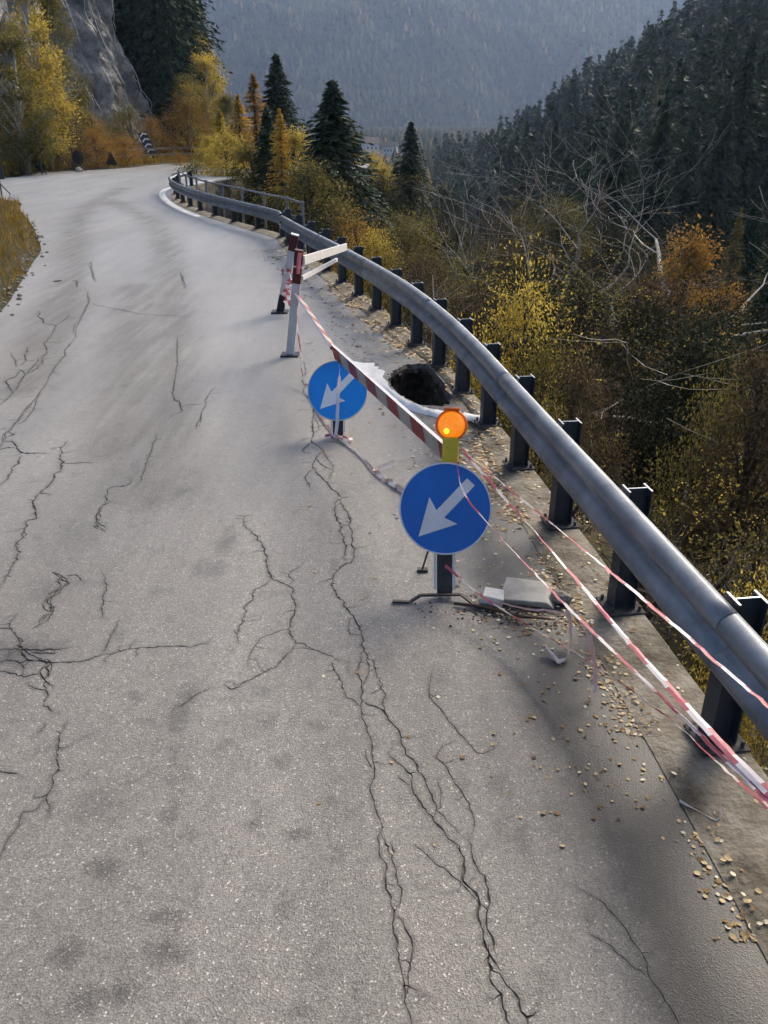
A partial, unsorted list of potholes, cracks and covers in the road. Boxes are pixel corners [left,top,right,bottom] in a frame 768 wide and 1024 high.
crack [171,337,216,430]
crack [0,572,199,855]
crack [0,261,167,584]
crack [301,362,537,1024]
pothole [388,364,453,406]
crack [224,515,337,690]
crack [579,888,679,1024]
